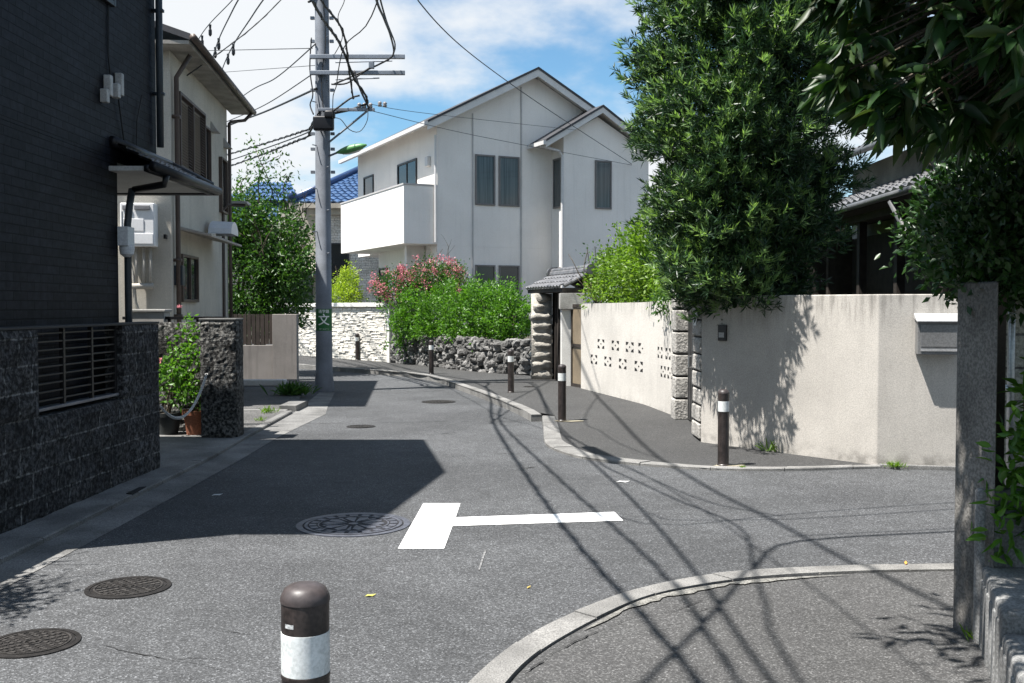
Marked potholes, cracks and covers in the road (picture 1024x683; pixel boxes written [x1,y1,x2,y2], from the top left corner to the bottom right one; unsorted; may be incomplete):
manhole cover [0,628,82,659]
manhole cover [296,512,410,537]
crack [102,644,248,675]
manhole cover [84,576,172,600]
